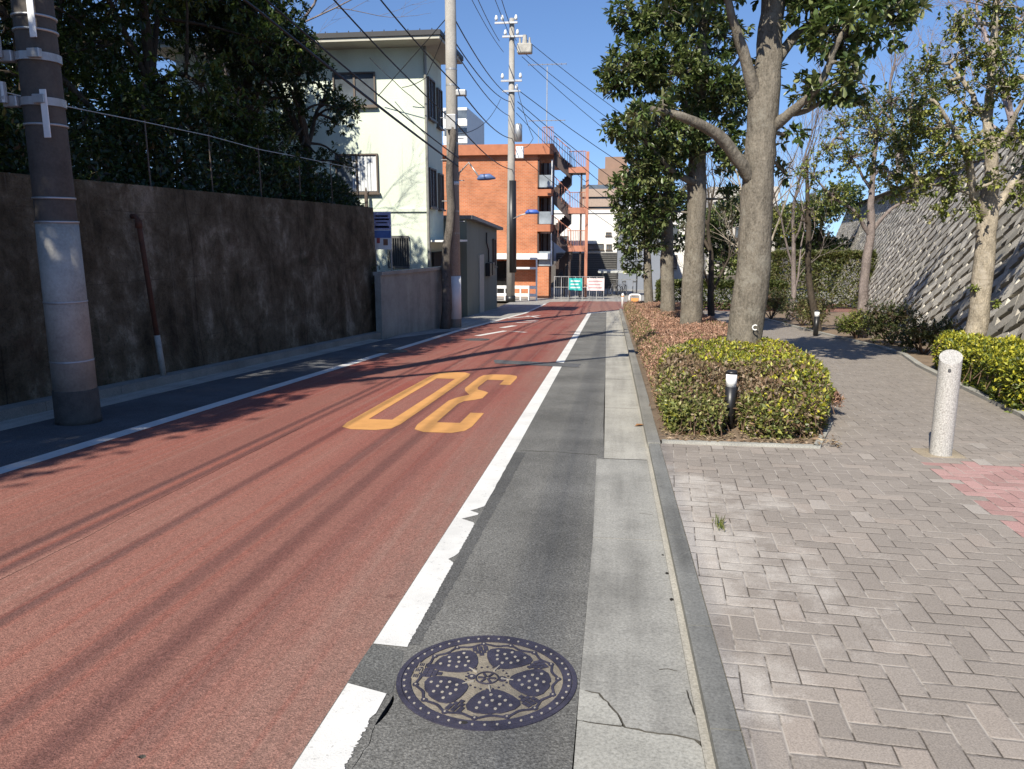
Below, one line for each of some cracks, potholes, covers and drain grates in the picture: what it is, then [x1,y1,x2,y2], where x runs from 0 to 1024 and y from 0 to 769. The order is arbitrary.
manhole cover [396,635,577,731]
crack [583,690,701,746]
crack [352,695,394,769]
